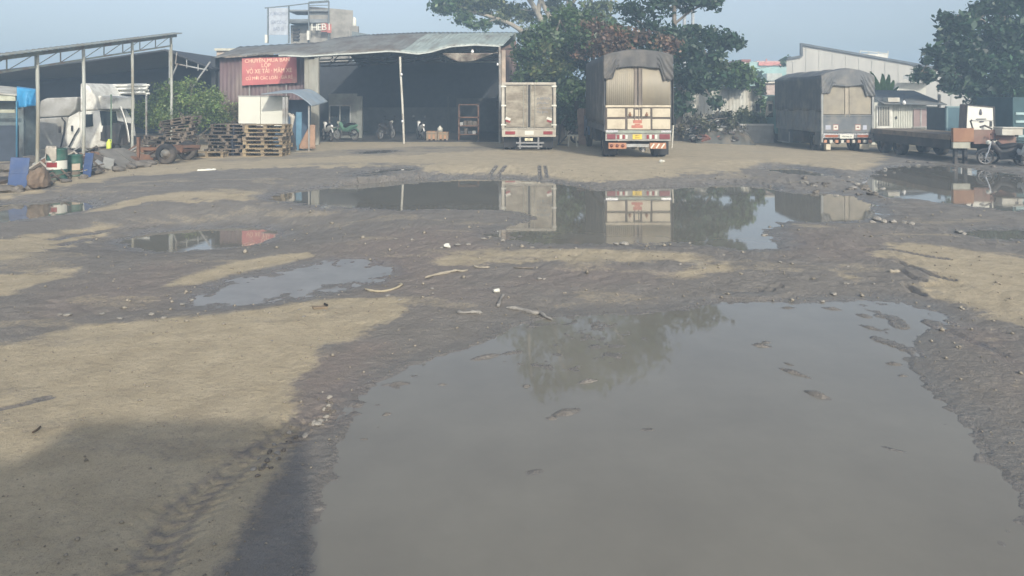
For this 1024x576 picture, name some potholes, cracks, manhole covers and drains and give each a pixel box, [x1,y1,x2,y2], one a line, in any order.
pothole [297,297,1024,576]
pothole [185,257,398,309]
pothole [0,196,107,222]
pothole [257,173,894,251]
pothole [845,163,1024,212]
pothole [111,222,287,253]
